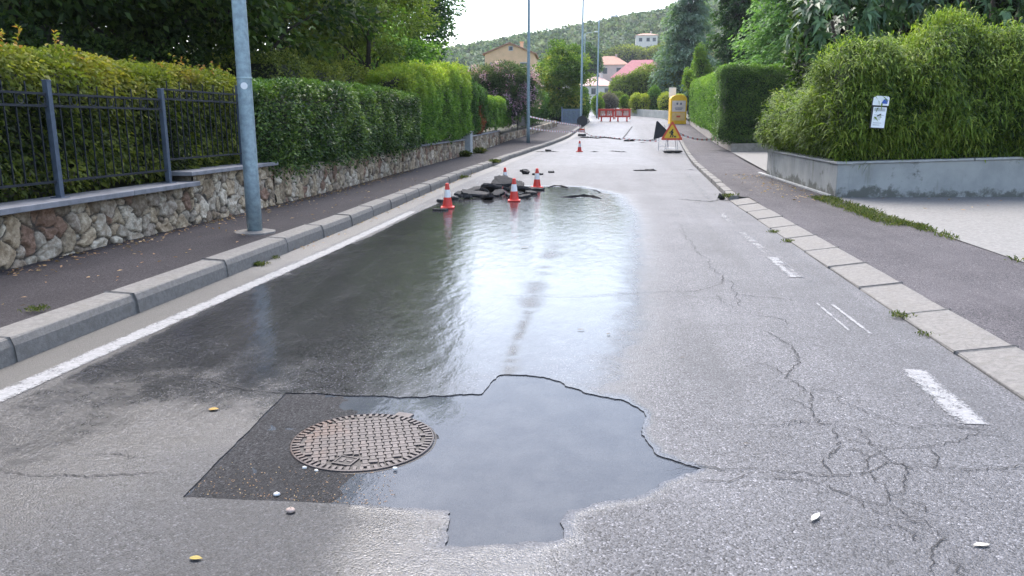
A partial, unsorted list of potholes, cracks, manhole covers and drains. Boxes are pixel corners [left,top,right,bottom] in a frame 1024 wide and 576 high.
crack [505,225,984,430]
crack [667,425,1024,576]
crack [2,453,159,477]
manhole cover [290,412,437,474]
